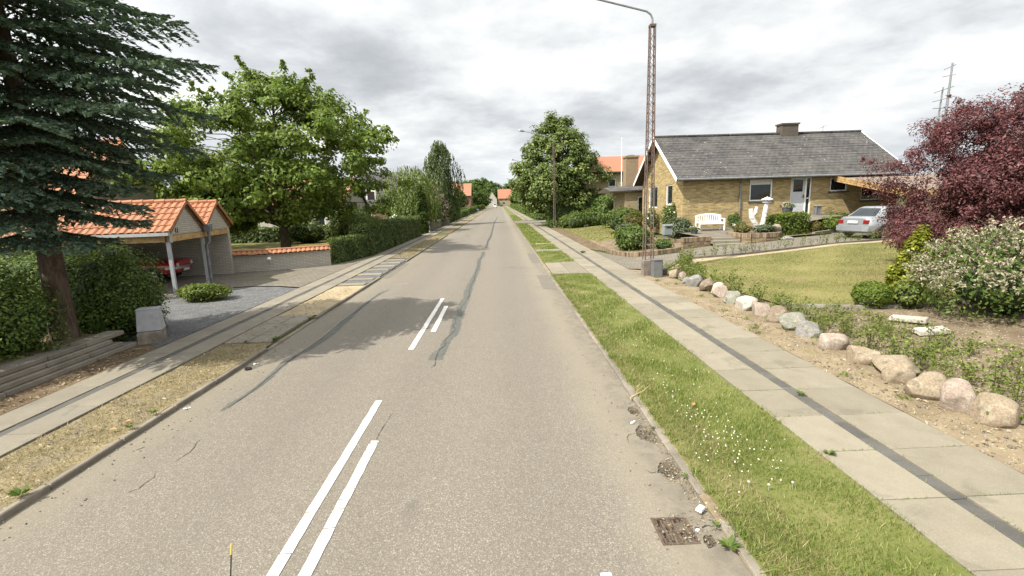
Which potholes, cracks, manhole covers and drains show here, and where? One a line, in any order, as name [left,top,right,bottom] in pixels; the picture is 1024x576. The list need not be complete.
drain grate [650,516,701,546]
pothole [635,425,657,444]
pothole [657,461,680,480]
